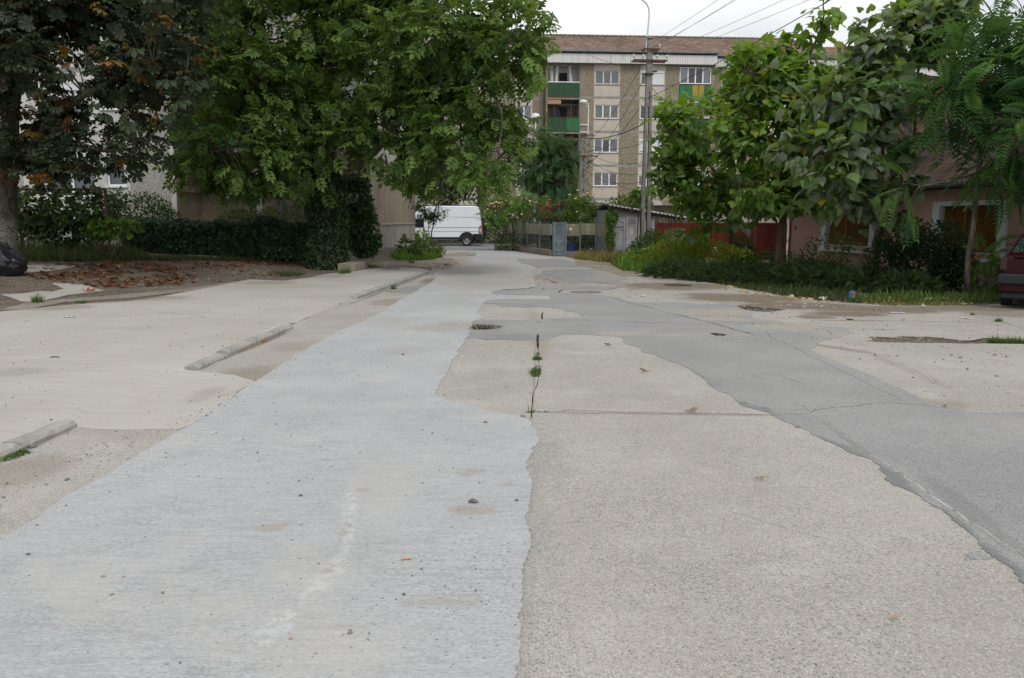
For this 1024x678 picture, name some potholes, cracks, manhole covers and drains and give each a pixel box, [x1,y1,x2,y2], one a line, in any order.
pothole [869,336,989,344]
